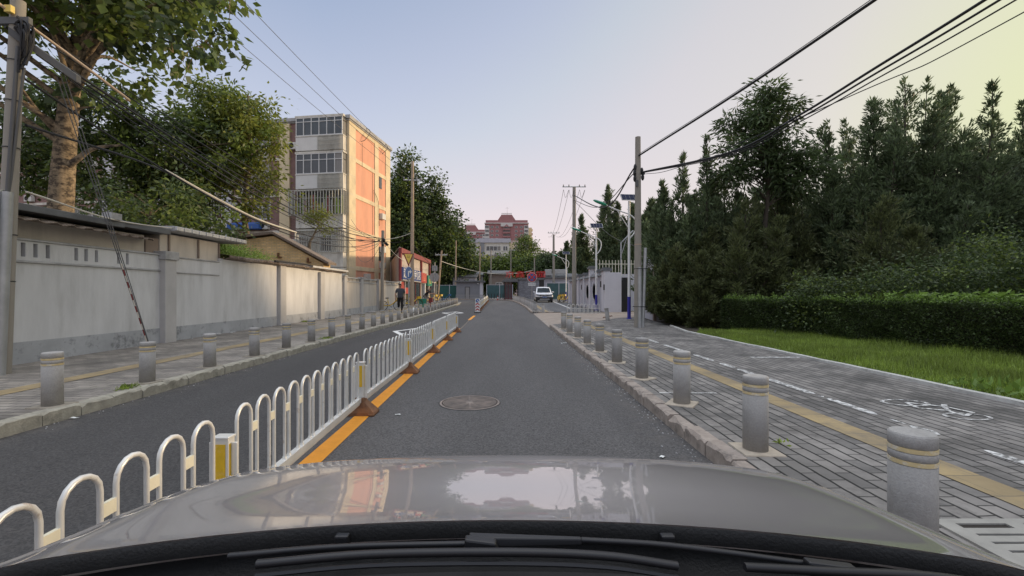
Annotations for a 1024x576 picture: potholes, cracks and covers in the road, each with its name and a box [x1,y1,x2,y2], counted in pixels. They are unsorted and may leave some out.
drain grate [939,518,1024,566]
manhole cover [438,394,501,411]
